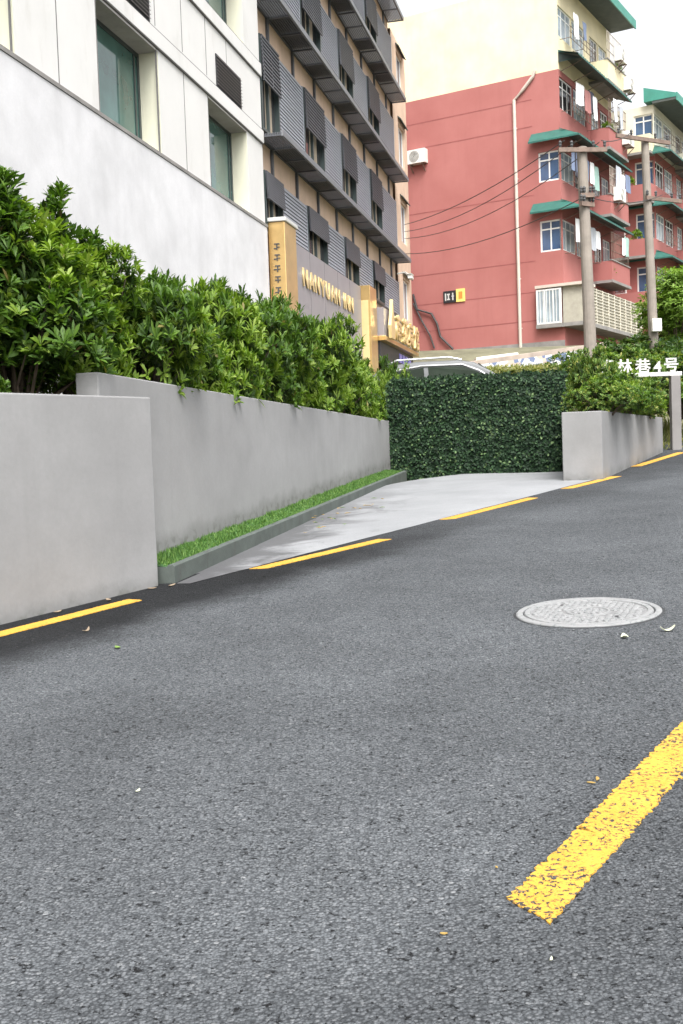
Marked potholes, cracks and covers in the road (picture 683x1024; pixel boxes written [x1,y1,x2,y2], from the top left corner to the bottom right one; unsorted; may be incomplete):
manhole cover [513,597,666,629]
